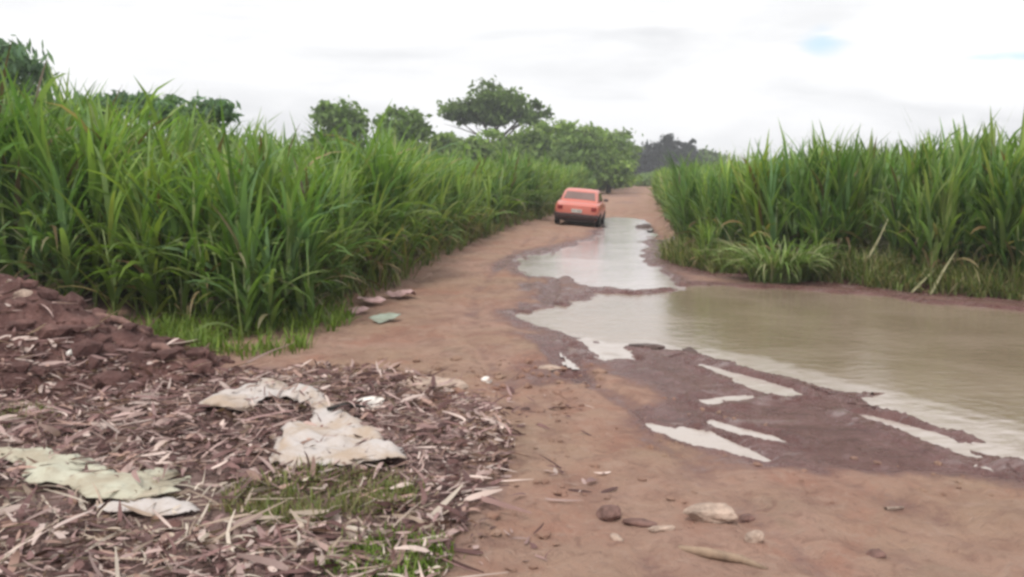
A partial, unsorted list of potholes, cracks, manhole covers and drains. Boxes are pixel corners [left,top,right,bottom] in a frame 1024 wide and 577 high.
pothole [492,217,689,292]
pothole [498,280,1024,474]
